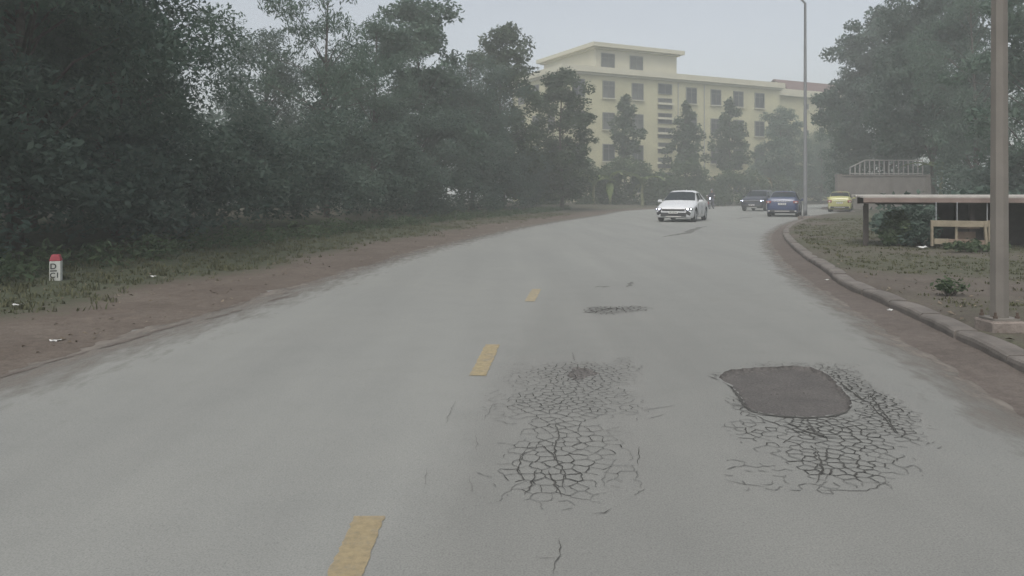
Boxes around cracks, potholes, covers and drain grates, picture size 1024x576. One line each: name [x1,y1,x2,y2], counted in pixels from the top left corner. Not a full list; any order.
crack [425,352,673,513]
crack [712,361,942,494]
pothole [567,367,599,380]
